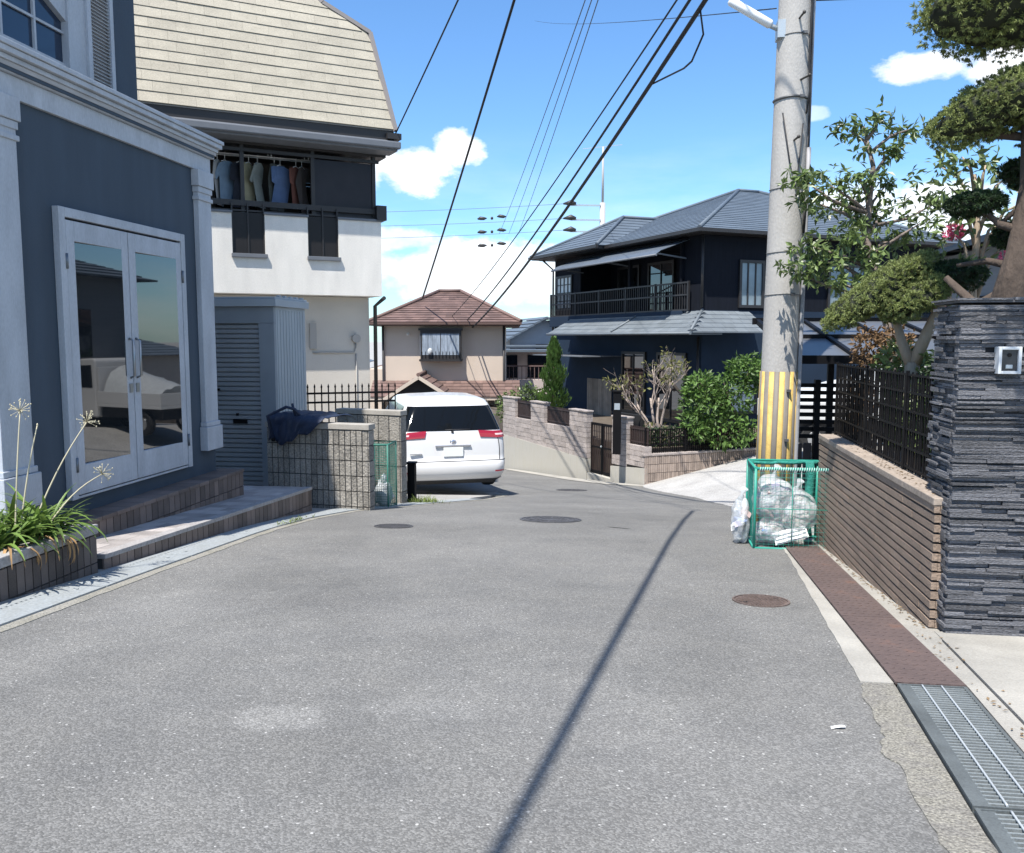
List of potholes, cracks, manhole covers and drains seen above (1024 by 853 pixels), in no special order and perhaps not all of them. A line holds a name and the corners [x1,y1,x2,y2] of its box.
drain grate [974,807,1024,853]
drain grate [897,683,1024,815]
manhole cover [732,594,790,607]
